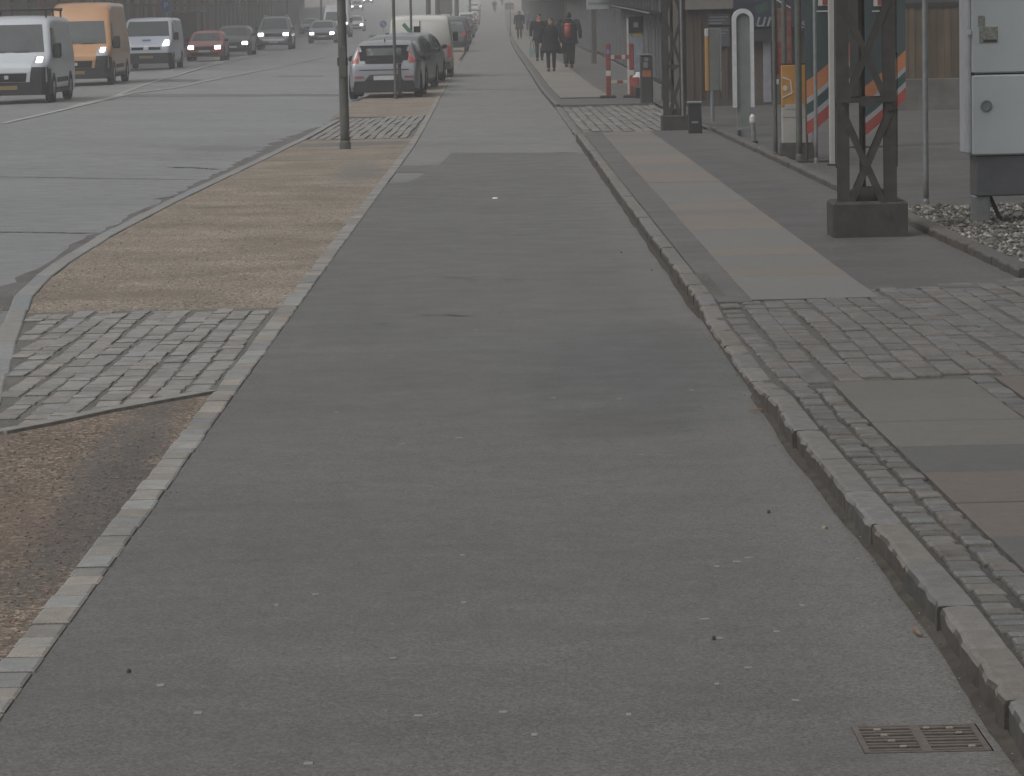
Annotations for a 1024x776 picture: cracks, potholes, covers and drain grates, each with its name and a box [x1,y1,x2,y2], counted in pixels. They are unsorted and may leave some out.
drain grate [851,723,992,754]
